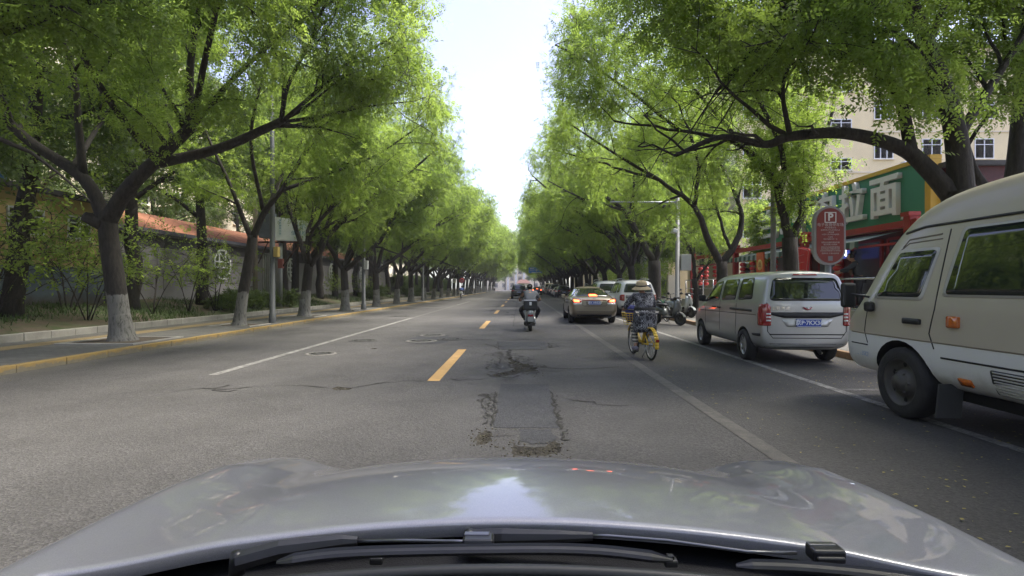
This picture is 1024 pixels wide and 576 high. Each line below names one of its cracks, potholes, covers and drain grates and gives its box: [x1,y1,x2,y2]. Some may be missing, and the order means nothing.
crack [549,390,623,440]
crack [179,380,427,391]
pothole [493,356,543,377]
pothole [501,439,571,458]
crack [451,334,609,425]
